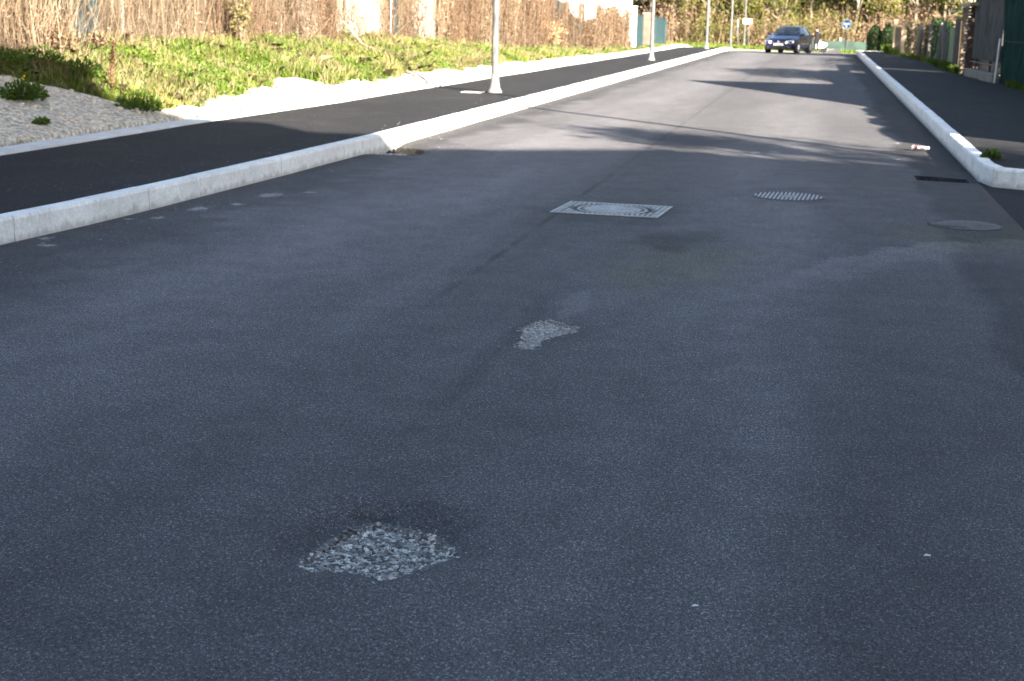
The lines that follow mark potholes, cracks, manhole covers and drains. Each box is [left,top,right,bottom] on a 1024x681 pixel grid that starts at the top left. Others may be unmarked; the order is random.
drain grate [914,175,970,183]
pothole [498,320,596,350]
manhole cover [550,201,673,219]
pothole [283,522,491,583]
manhole cover [927,220,1005,231]
